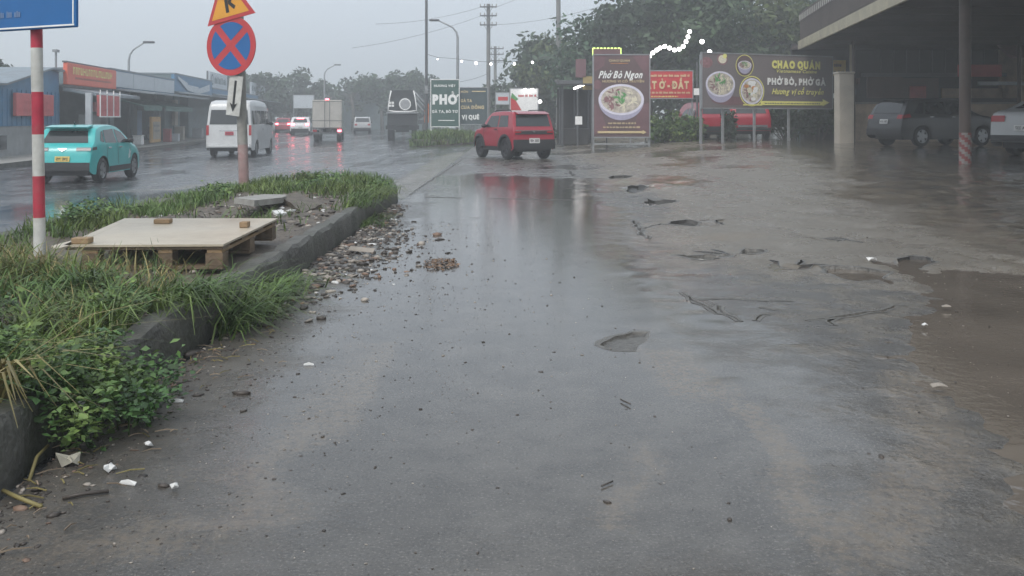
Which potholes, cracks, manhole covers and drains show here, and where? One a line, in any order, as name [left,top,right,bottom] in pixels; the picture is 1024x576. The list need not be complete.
pothole [893,255,940,269]
pothole [666,219,702,227]
pothole [594,330,650,352]
pothole [819,264,895,282]
crack [679,292,912,325]
pothole [624,184,649,193]
crack [631,220,681,239]
